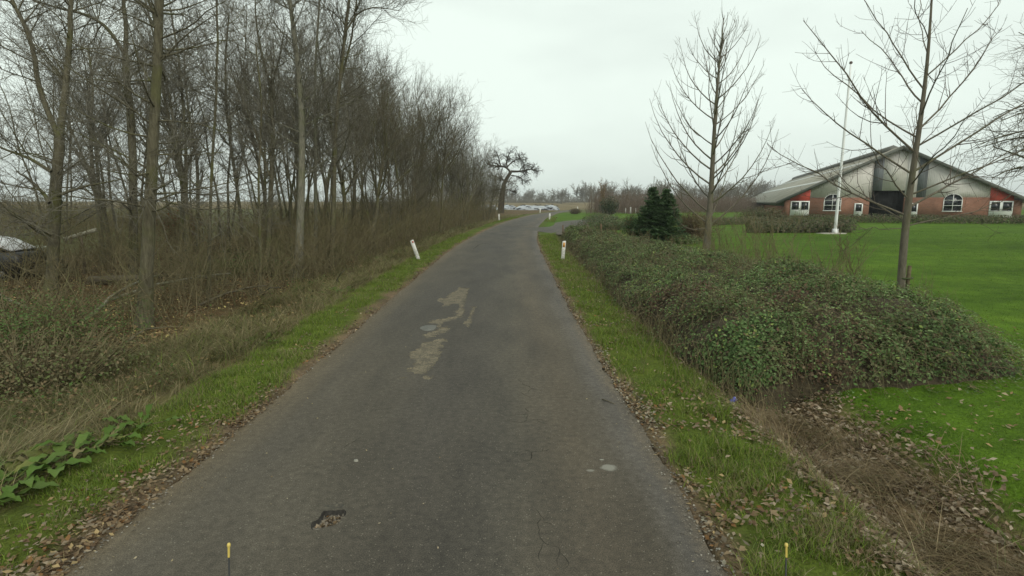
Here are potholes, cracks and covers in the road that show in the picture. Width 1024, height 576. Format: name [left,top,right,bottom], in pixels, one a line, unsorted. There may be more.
crack [537,512,569,568]
pothole [311,509,346,530]
